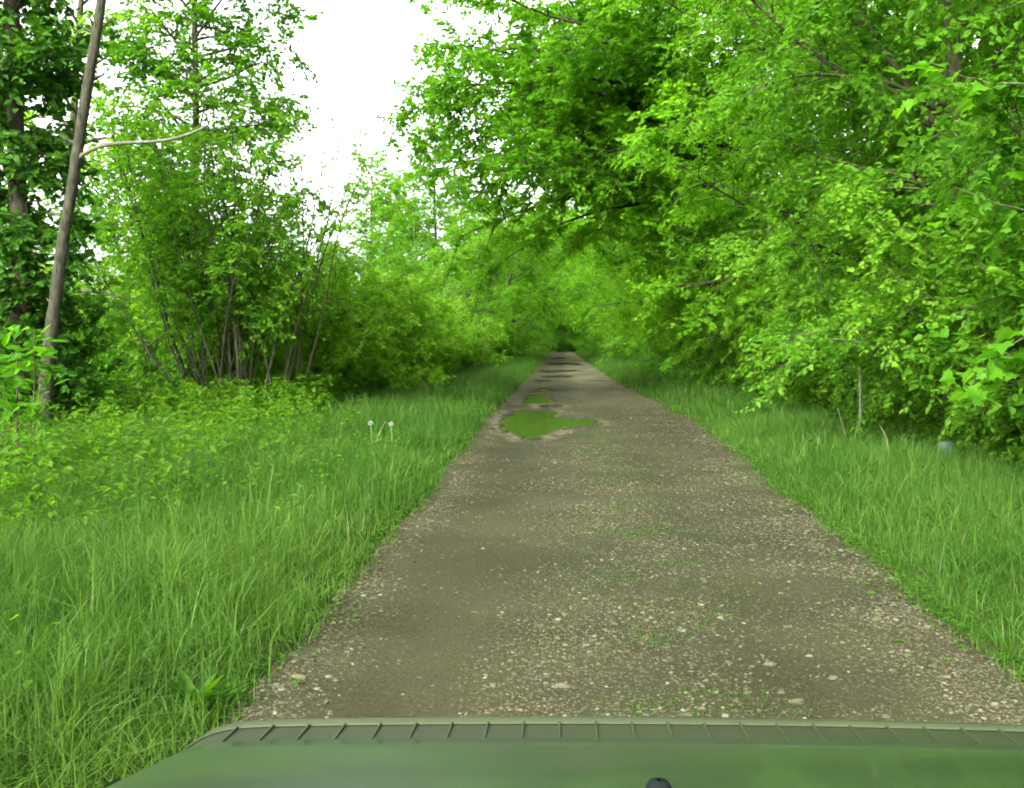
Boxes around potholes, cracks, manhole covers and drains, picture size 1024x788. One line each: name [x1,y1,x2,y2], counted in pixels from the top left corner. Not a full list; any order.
pothole [516,394,558,405]
pothole [491,409,606,441]
